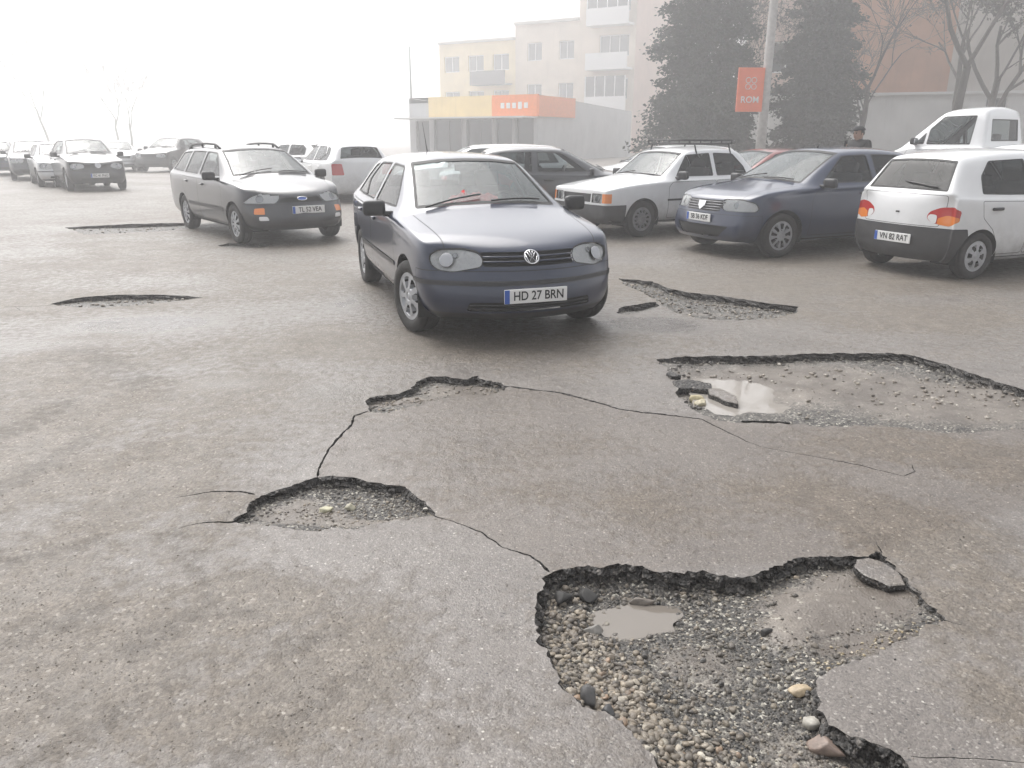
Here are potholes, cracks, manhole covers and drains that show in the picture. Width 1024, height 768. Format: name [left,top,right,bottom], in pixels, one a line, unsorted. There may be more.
pothole [656,353,1024,434]
pothole [535,551,946,768]
crack [176,521,236,530]
pothole [53,295,202,308]
pothole [232,476,435,531]
pothole [365,376,510,413]
crack [433,515,550,572]
crack [511,386,916,476]
pothole [619,279,798,320]
pothole [65,223,186,235]
crack [317,411,368,477]
